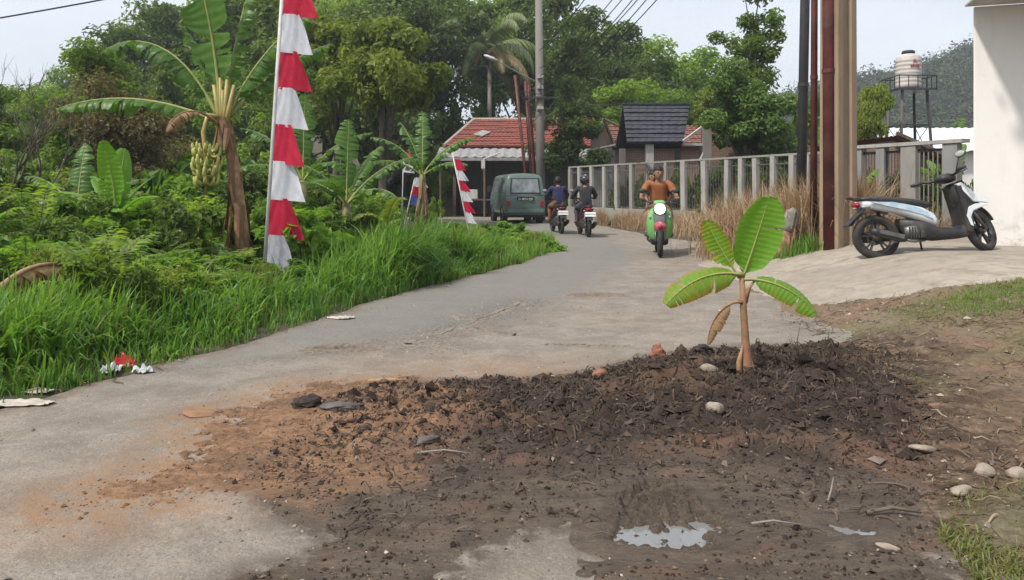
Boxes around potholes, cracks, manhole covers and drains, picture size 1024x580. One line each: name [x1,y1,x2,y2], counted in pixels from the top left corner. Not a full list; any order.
crack [405,302,527,344]
